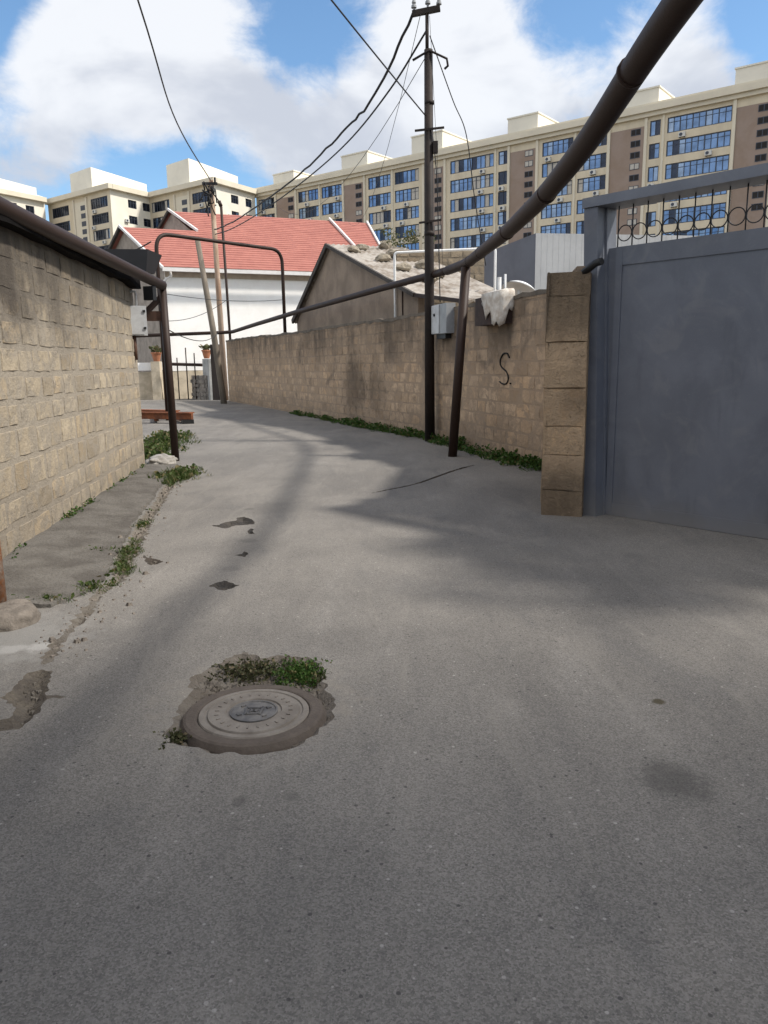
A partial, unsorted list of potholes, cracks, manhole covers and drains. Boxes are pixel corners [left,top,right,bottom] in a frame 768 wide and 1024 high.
manhole cover [180,684,326,755]
pothole [0,669,65,731]
pothole [209,581,239,590]
crack [373,465,474,493]
pothole [212,517,255,528]
